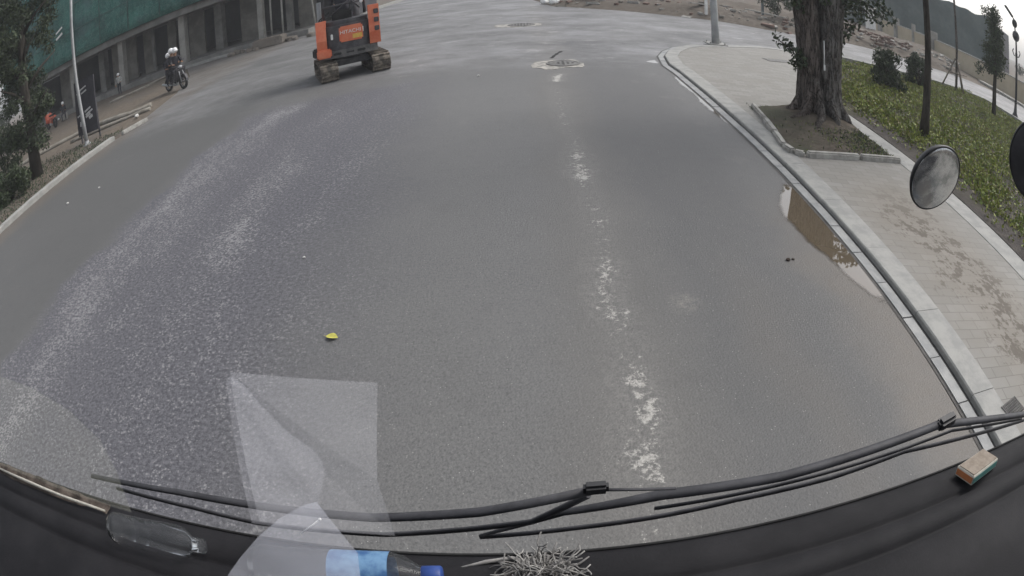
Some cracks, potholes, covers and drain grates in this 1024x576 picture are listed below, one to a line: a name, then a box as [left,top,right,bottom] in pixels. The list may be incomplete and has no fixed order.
manhole cover [531,59,584,70]
drain grate [1001,396,1024,413]
